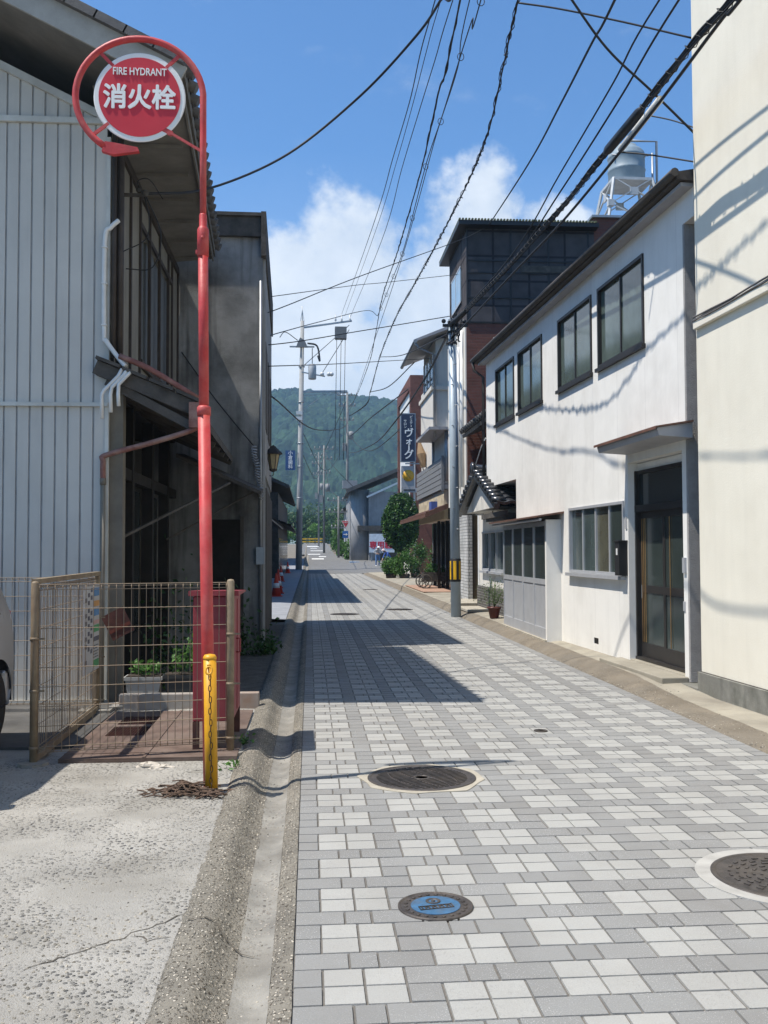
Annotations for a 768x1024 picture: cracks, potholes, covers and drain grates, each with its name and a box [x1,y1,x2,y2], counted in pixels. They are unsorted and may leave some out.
crack [24,914,255,970]
manhole cover [398,892,473,923]
manhole cover [695,849,768,904]
manhole cover [357,763,485,795]
